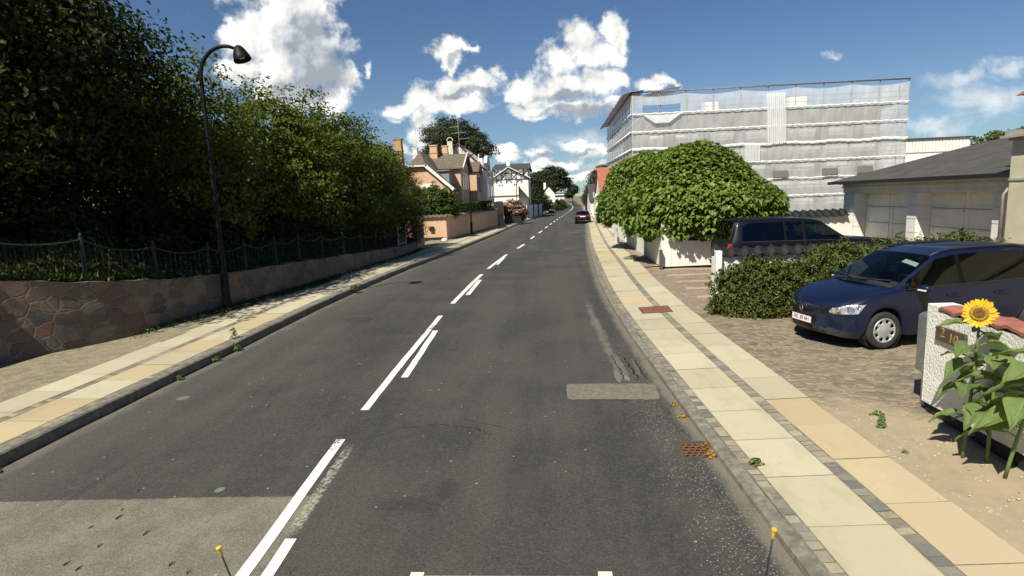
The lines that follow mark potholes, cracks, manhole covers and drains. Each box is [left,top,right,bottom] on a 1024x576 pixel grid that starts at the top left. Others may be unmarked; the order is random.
crack [611,355,648,381]
drain grate [672,441,713,458]
manhole cover [638,305,673,314]
crack [397,419,506,435]
